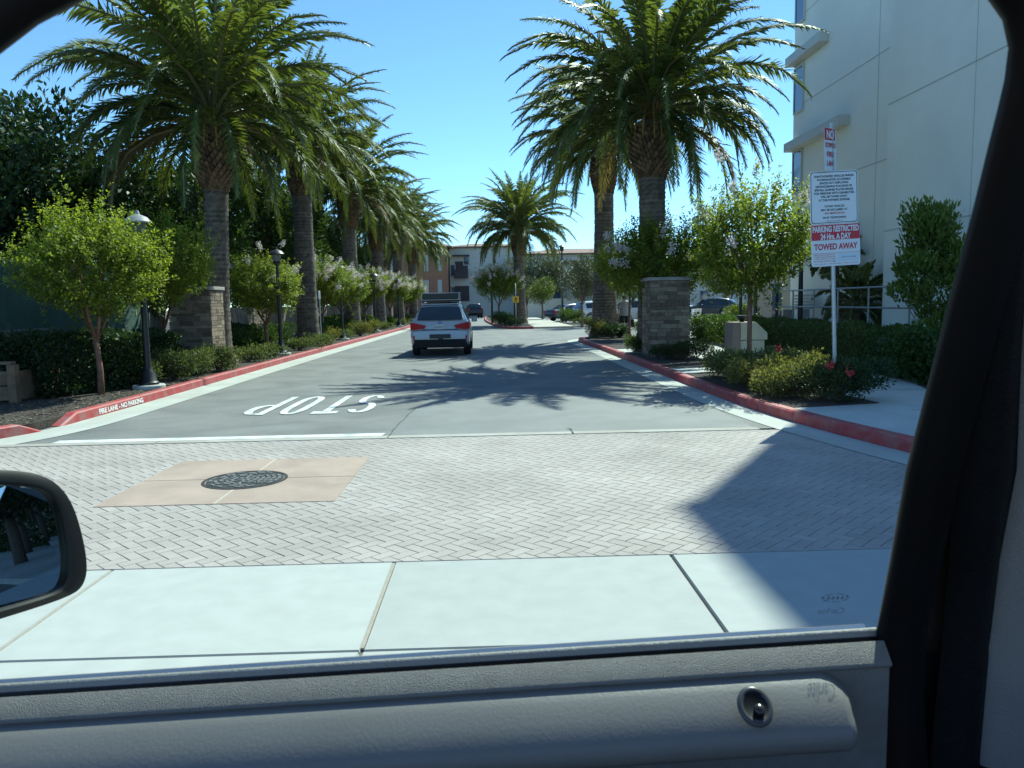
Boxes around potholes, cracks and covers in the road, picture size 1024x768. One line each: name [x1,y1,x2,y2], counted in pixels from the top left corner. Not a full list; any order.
manhole cover [201,470,288,490]
